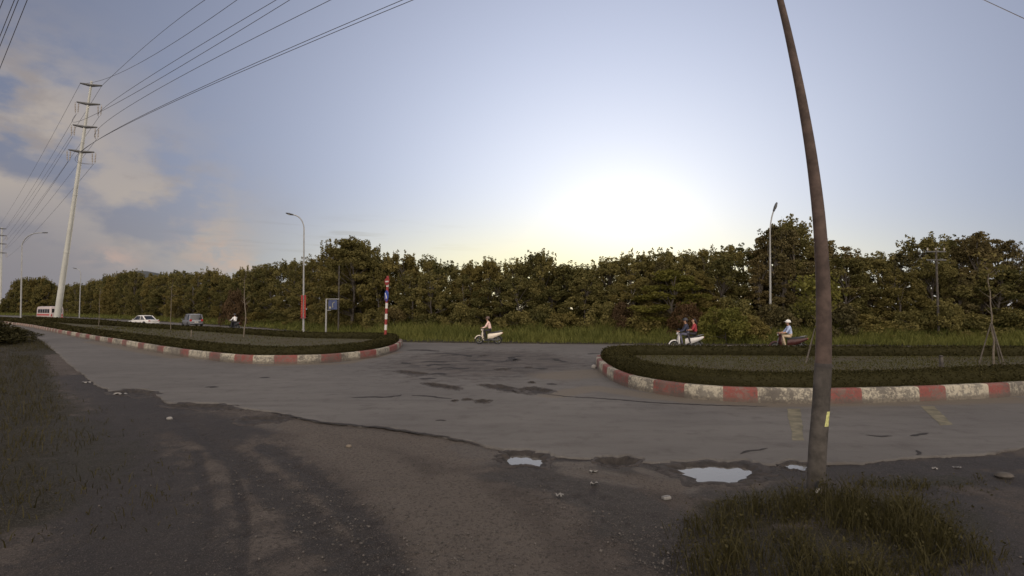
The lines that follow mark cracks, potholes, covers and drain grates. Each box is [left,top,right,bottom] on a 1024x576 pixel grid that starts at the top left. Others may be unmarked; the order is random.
pothole [776,460,807,473]
pothole [491,450,557,470]
pothole [650,459,782,487]
